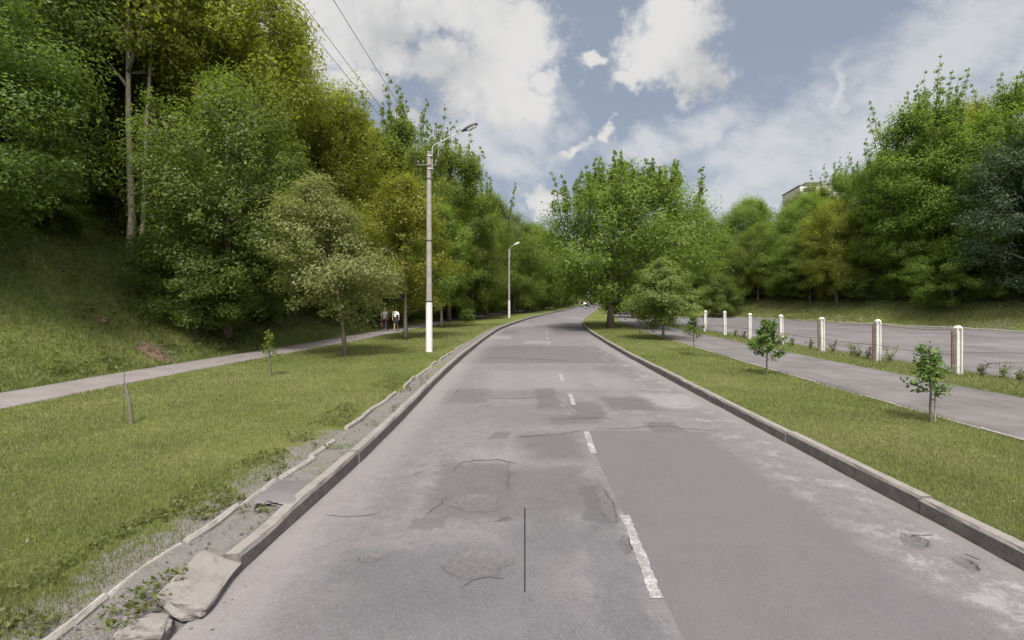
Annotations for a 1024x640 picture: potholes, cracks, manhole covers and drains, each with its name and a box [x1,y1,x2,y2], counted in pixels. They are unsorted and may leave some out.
crack [453,459,516,489]
pothole [951,555,984,572]
pothole [898,533,931,550]
